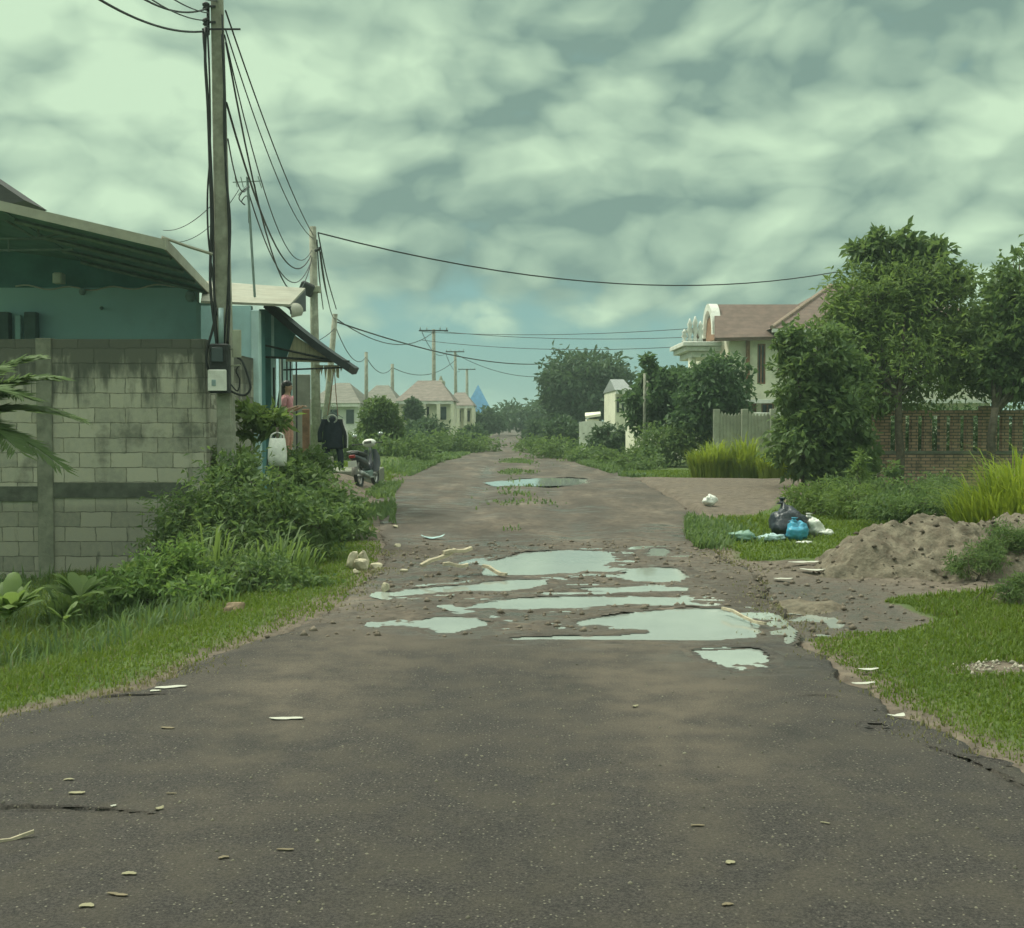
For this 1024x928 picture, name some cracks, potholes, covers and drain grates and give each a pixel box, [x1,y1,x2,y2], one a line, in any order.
pothole [437,591,724,613]
crack [0,803,158,815]
pothole [678,644,786,674]
pothole [622,546,690,558]
pothole [536,584,707,597]
pothole [485,477,592,488]
pothole [370,577,569,600]
pothole [481,603,802,651]
pothole [593,565,704,584]
pothole [365,612,513,636]
pothole [457,547,639,580]
crack [922,744,1024,790]
